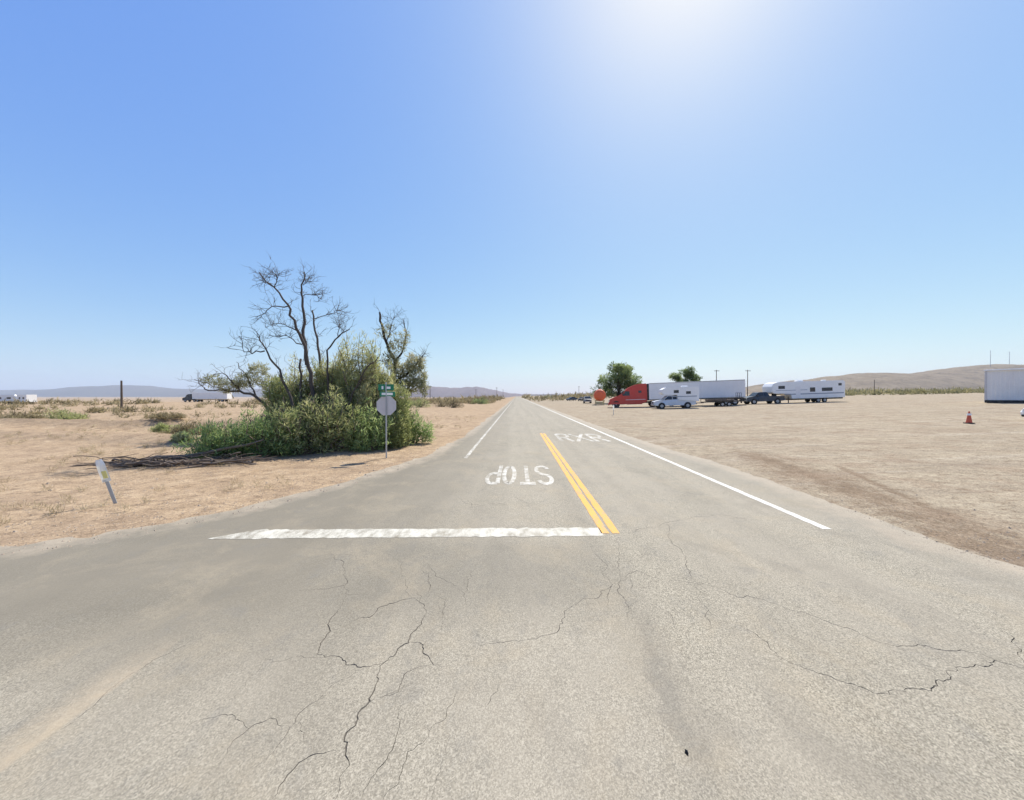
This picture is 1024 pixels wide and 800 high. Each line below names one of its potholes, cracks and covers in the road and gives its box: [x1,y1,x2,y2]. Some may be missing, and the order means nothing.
crack [165,554,472,800]
crack [479,515,1024,695]
